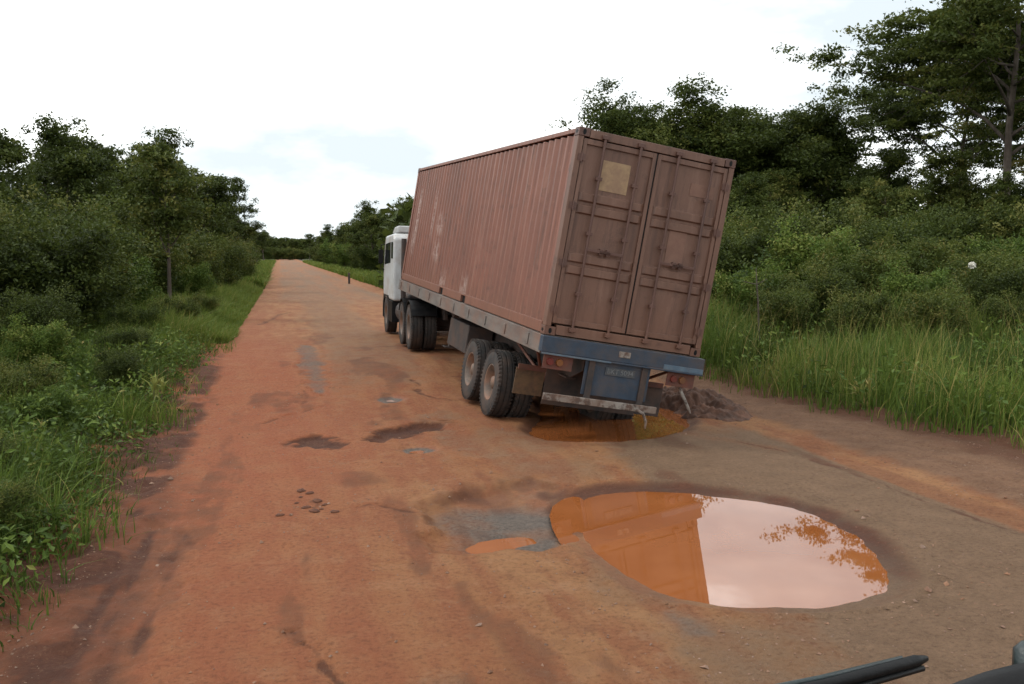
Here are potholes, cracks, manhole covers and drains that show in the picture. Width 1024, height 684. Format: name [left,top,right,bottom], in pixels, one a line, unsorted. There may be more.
pothole [359,420,454,444]
pothole [515,393,701,442]
pothole [286,435,350,450]
pothole [539,479,936,620]
